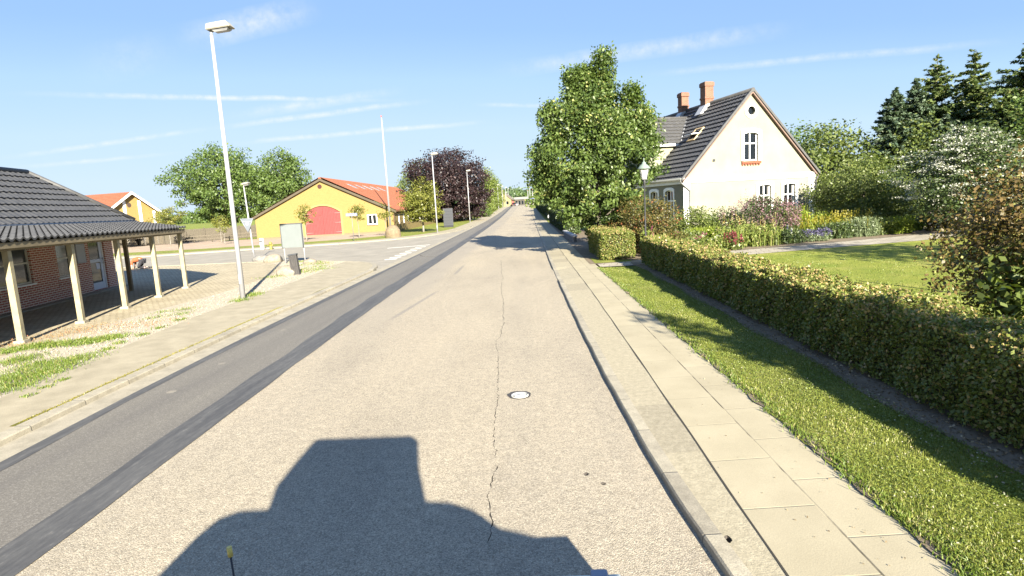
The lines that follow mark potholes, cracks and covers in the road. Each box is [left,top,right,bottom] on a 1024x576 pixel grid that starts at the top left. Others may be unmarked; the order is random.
crack [486,266,504,543]
manhole cover [507,391,531,399]
